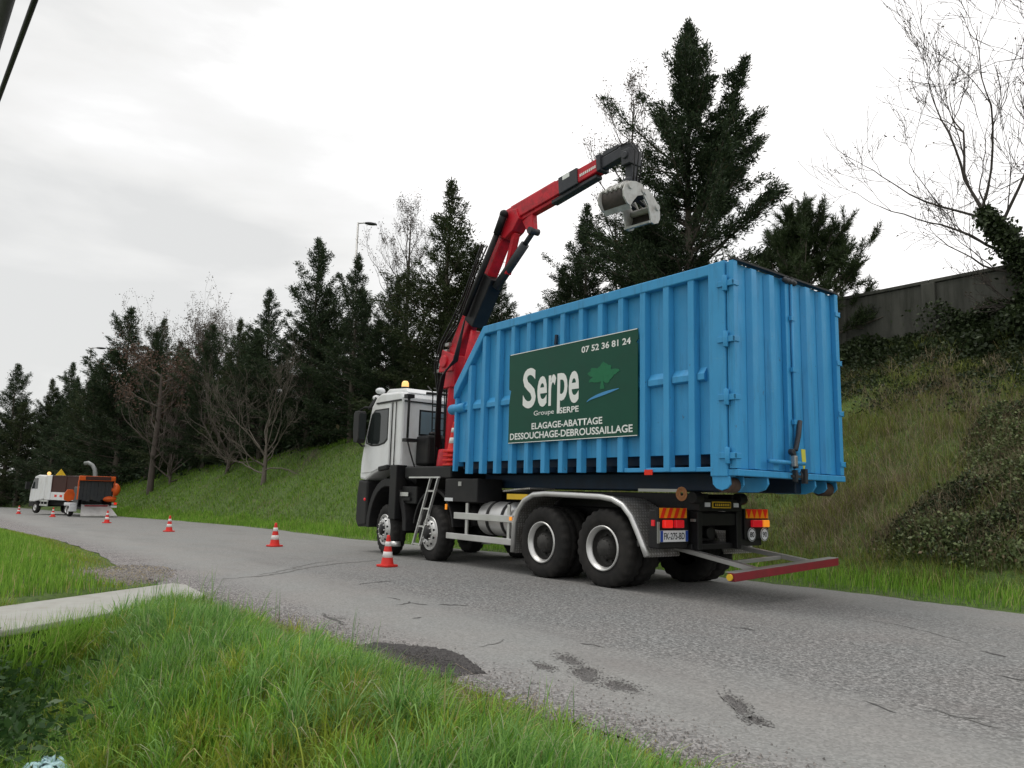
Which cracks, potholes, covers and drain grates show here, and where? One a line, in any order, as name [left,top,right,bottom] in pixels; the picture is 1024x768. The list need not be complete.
crack [927,707,999,728]
crack [866,619,1006,657]
pothole [557,659,609,690]
pothole [716,685,762,725]
crack [212,560,374,580]
pothole [595,676,650,695]
pothole [740,711,775,727]
pothole [527,660,560,672]
